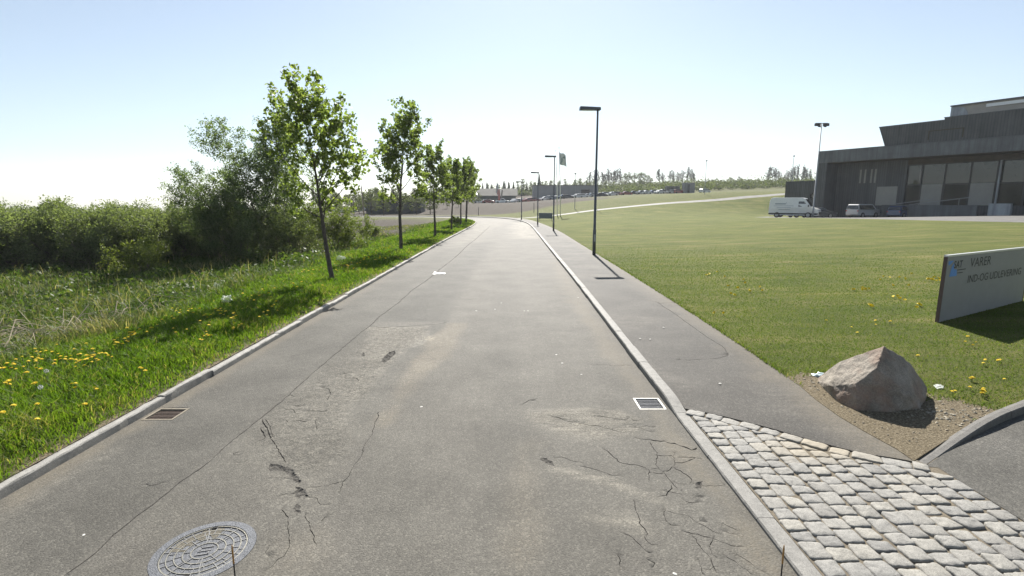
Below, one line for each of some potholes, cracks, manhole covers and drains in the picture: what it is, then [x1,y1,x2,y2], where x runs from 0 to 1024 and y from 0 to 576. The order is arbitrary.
drain grate [633,398,667,410]
drain grate [141,408,190,420]
manhole cover [147,521,257,576]
crack [657,302,729,360]
pothole [267,464,301,484]
crack [552,416,761,574]
crack [65,226,490,575]
